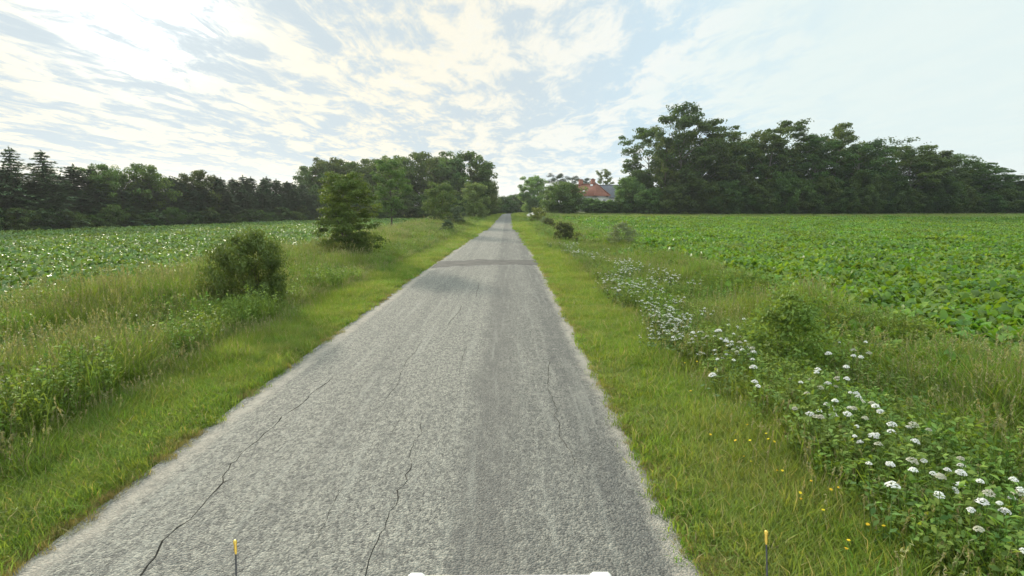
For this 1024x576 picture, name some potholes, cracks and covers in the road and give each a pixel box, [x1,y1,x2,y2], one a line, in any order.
crack [140,379,331,576]
crack [547,360,575,473]
crack [365,341,422,576]
